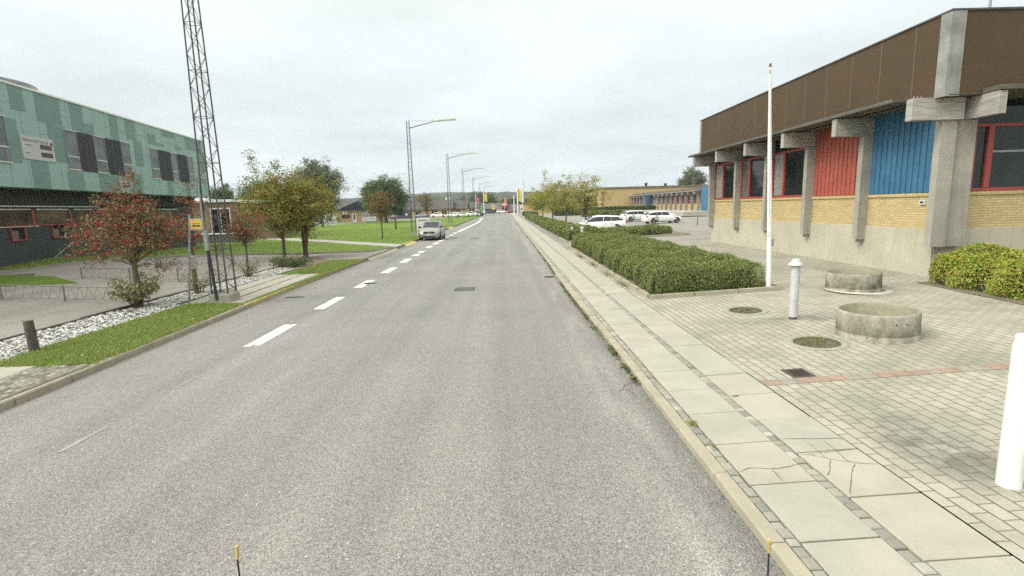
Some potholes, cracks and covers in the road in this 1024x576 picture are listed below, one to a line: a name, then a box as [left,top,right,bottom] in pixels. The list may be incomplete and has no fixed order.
crack [743,438,870,490]
manhole cover [723,306,769,315]
drain grate [781,368,816,378]
manhole cover [785,335,850,350]
